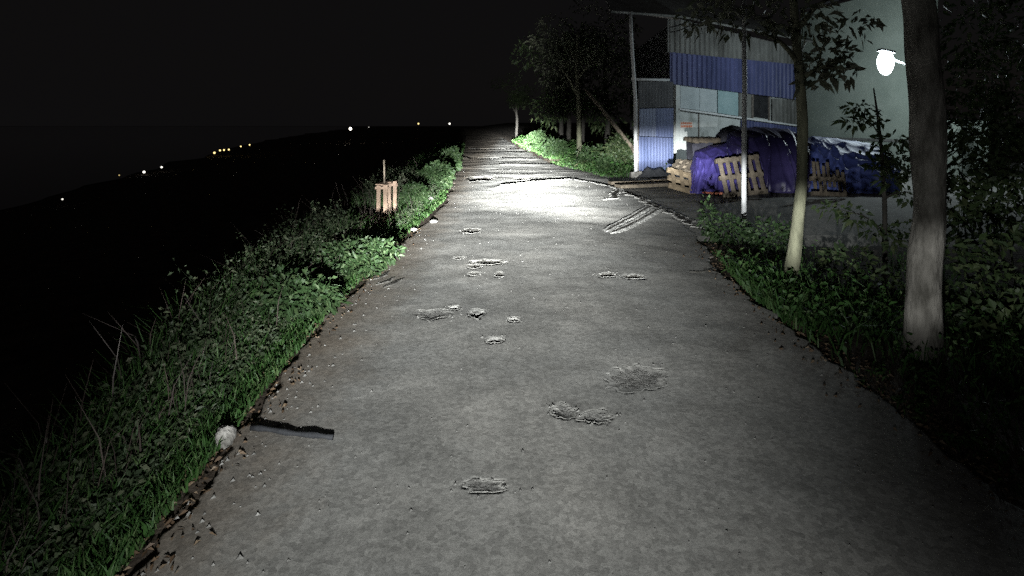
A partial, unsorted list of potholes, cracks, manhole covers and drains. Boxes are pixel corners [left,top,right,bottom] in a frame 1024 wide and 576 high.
pothole [549,403,577,419]
pothole [576,409,614,425]
pothole [601,364,671,394]
pothole [467,309,487,319]
pothole [415,309,456,321]
pothole [462,478,508,493]
